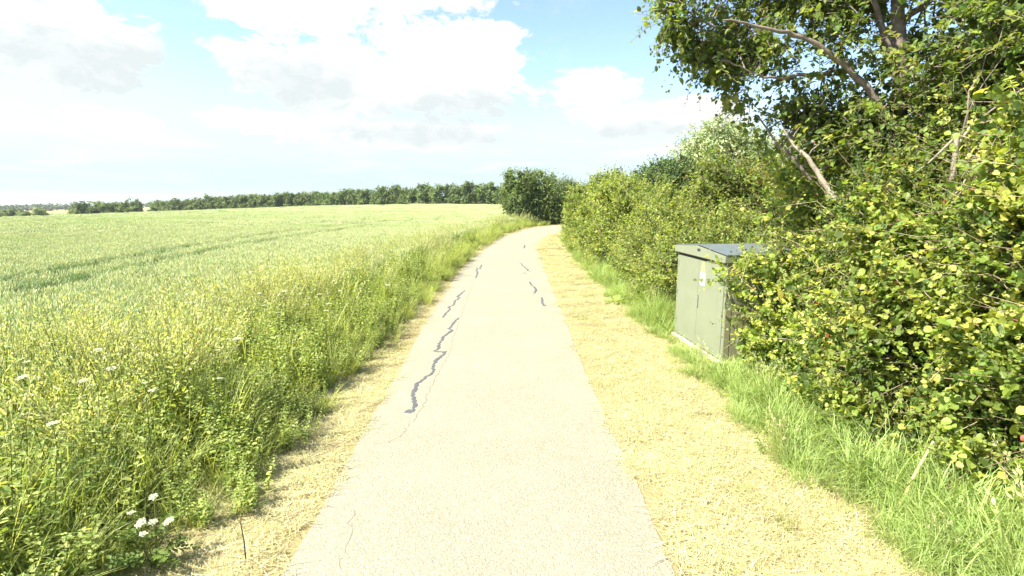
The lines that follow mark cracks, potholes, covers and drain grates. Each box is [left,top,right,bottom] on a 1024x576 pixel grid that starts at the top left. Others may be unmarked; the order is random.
crack [339,510,355,571]
crack [373,280,473,445]
